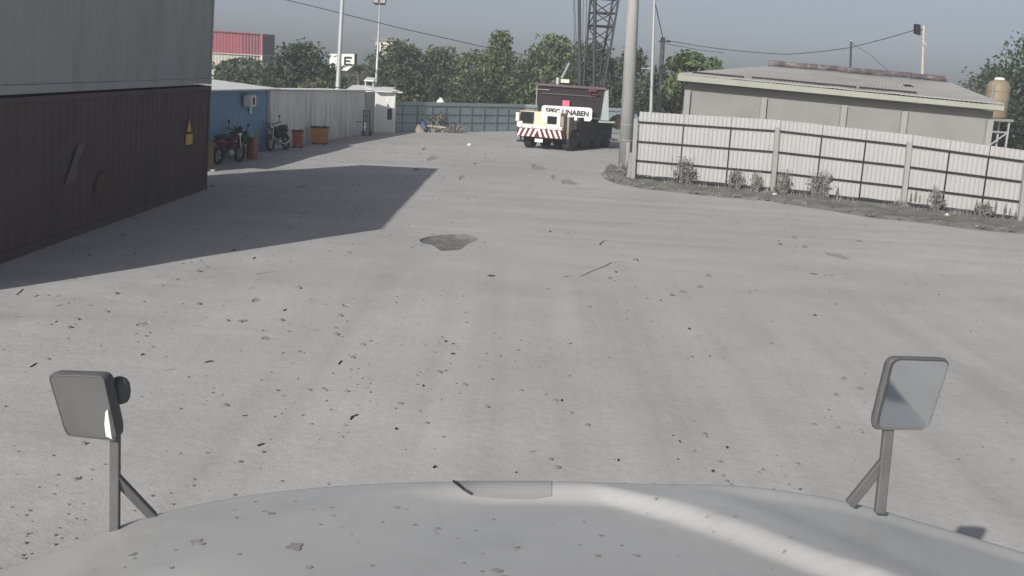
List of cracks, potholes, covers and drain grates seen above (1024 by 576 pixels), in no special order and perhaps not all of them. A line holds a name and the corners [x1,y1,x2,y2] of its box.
pothole [420,234,478,251]
